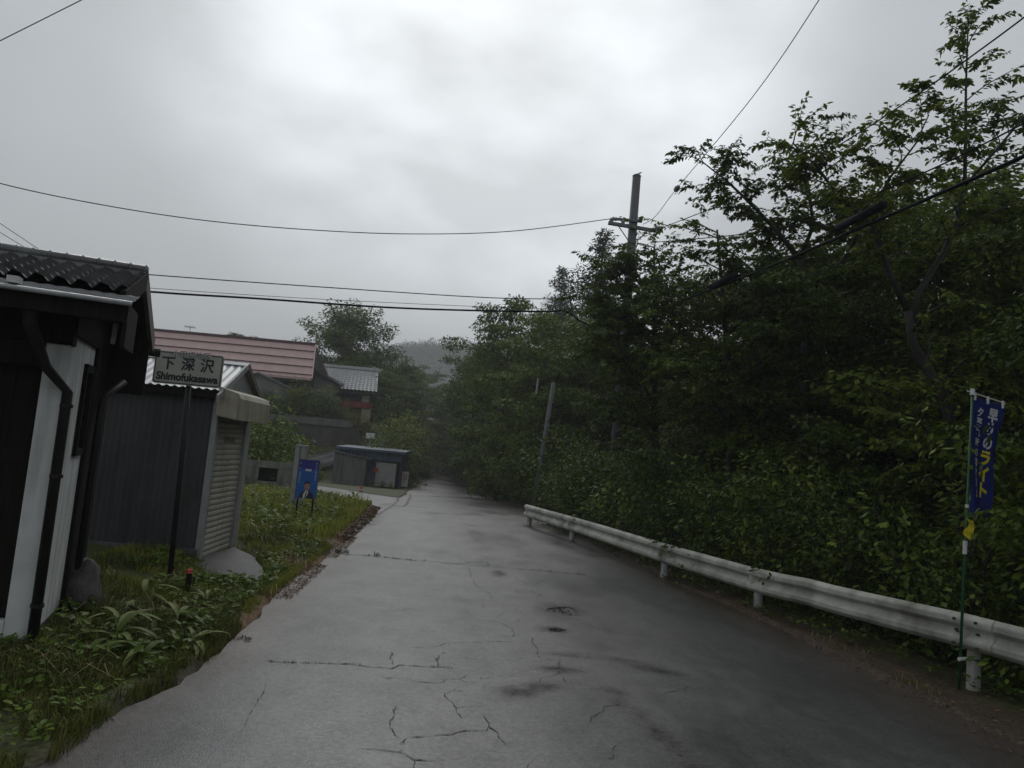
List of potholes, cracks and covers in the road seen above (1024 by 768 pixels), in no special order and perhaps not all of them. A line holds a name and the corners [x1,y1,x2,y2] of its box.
crack [267,573,518,768]
pothole [546,607,577,615]
